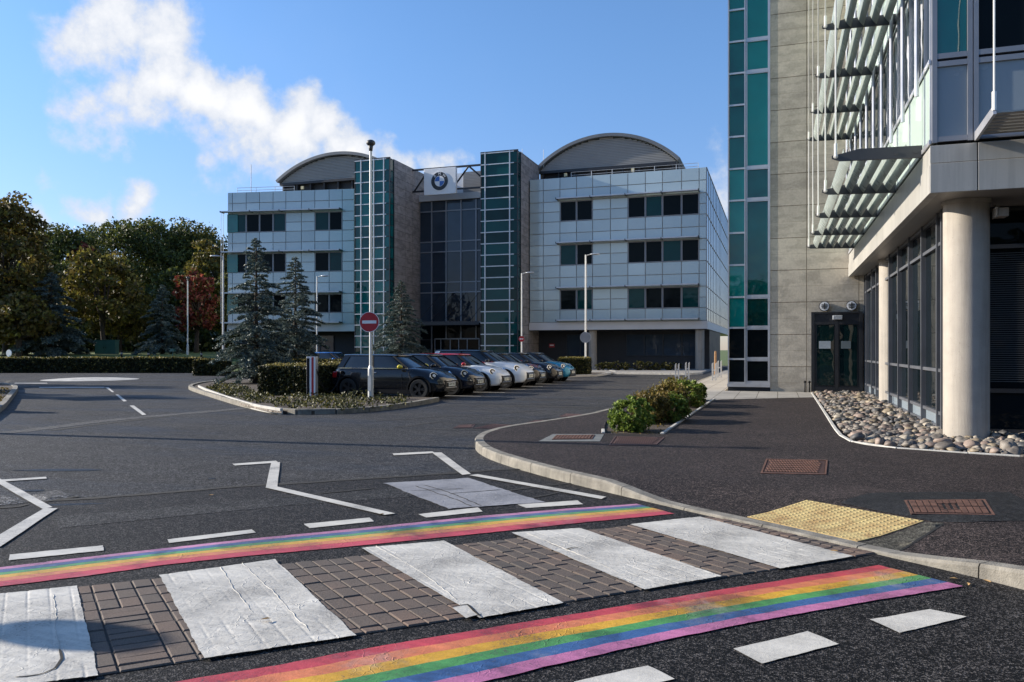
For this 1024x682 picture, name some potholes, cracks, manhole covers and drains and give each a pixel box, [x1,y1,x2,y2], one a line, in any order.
manhole cover [608,436,665,446]
manhole cover [760,459,828,475]
